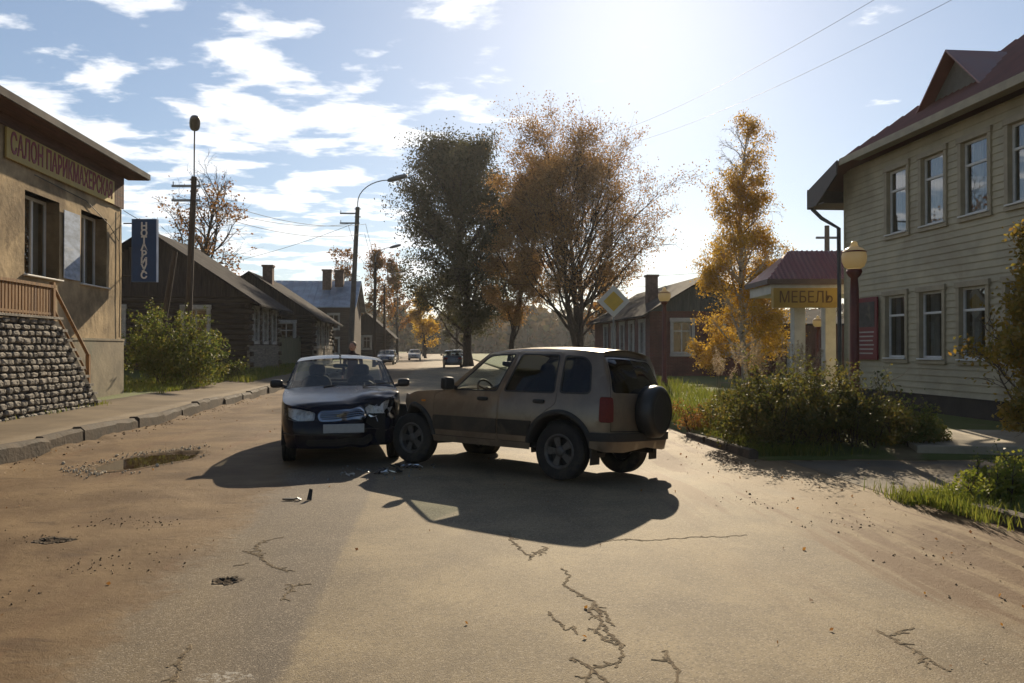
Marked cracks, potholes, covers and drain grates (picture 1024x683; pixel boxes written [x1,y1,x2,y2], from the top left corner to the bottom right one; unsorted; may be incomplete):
crack [162,644,192,683]
crack [508,532,625,683]
pothole [60,444,224,479]
crack [876,627,951,671]
crack [651,650,682,683]
crack [233,537,309,601]
pothole [211,576,243,586]
pothole [31,536,78,544]
